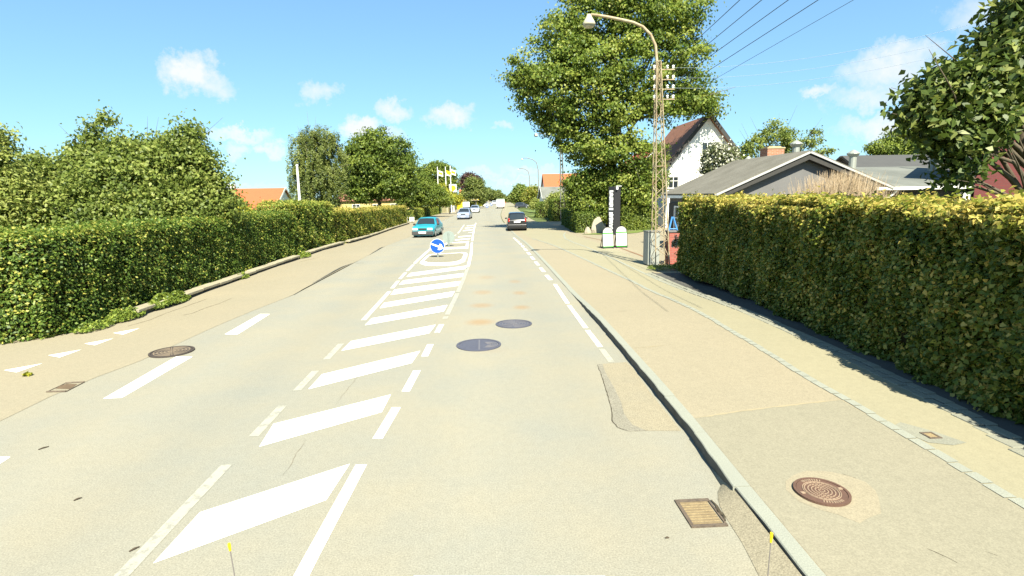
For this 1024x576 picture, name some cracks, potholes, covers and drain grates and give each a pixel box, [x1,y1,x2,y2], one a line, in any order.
drain grate [46,381,85,392]
manhole cover [496,319,532,329]
manhole cover [148,346,195,358]
manhole cover [793,477,852,507]
drain grate [674,498,728,528]
manhole cover [456,339,501,352]
